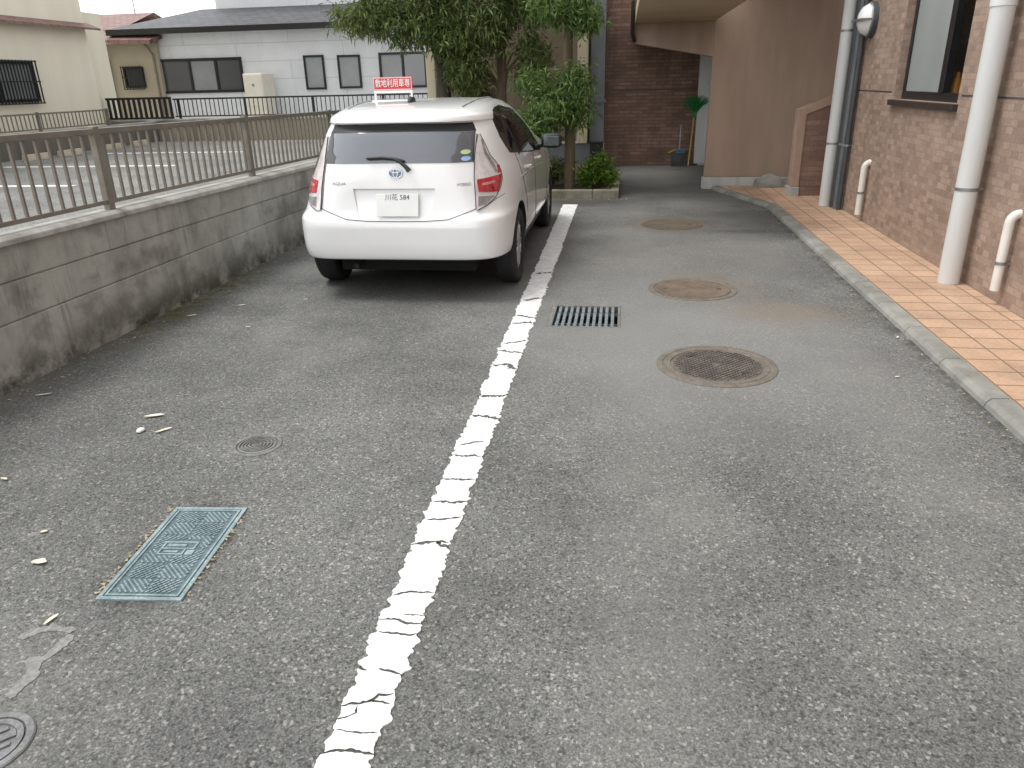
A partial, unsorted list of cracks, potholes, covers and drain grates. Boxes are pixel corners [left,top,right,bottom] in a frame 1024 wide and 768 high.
crack [411,540,448,548]
manhole cover [0,711,37,768]
drain grate [546,305,621,328]
manhole cover [641,219,703,230]
manhole cover [648,278,738,301]
manhole cover [656,346,779,388]
crack [493,297,540,370]
crack [452,441,484,457]
crack [319,693,393,756]
crack [423,500,467,520]
manhole cover [95,507,248,602]
manhole cover [231,434,283,457]
